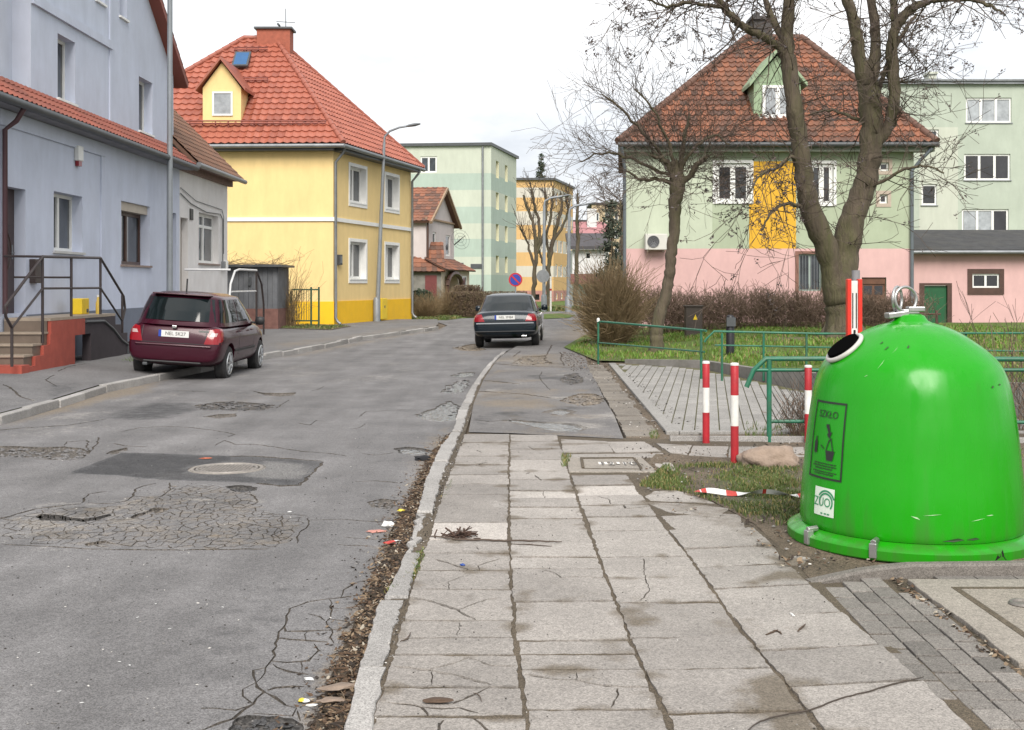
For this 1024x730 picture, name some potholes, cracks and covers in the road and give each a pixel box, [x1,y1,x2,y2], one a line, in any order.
pothole [195,401,275,411]
crack [0,426,381,551]
crack [410,548,501,634]
pothole [228,715,304,730]
pothole [35,514,111,522]
manhole cover [188,462,266,474]
crack [201,580,366,730]
pothole [440,380,470,394]
pothole [367,499,399,509]
crack [388,657,648,730]
utility cover [568,457,656,473]
